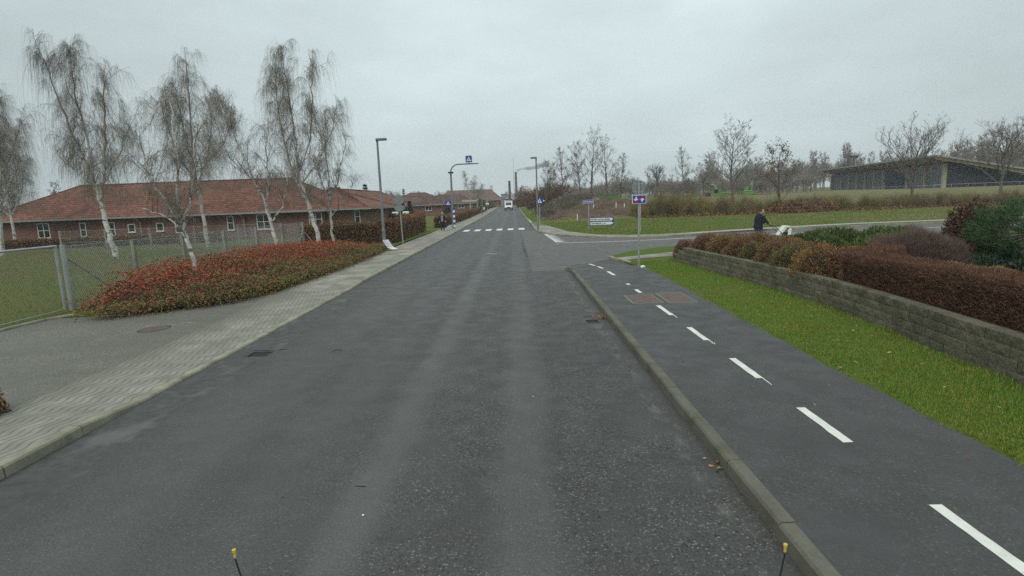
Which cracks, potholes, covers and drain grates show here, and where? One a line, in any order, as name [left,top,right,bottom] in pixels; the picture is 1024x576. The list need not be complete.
manhole cover [655,292,698,303]
manhole cover [137,325,171,333]
manhole cover [623,294,664,304]
